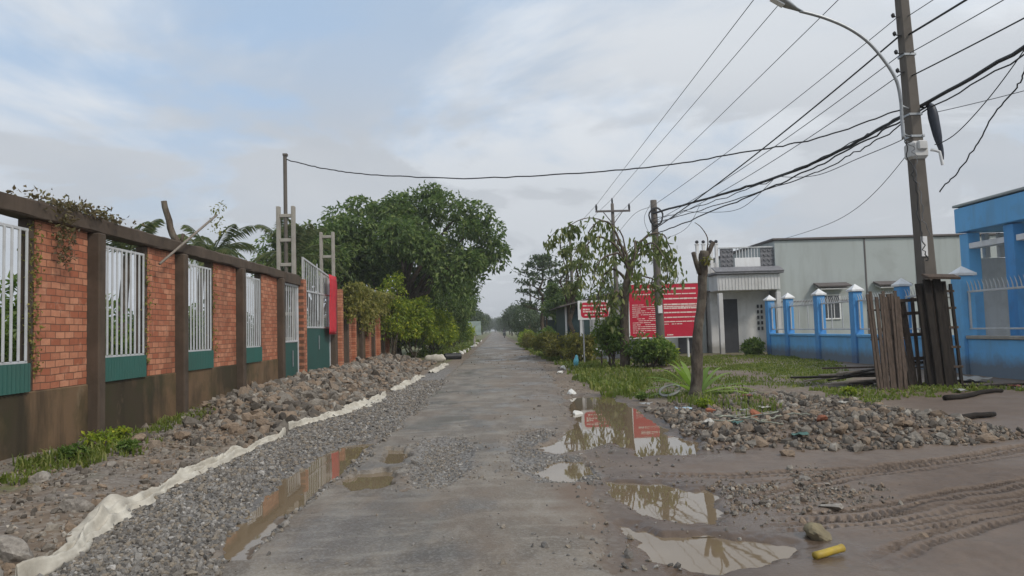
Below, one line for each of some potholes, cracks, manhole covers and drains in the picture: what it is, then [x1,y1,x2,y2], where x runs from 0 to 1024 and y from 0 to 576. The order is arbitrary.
pothole [335,466,403,491]
pothole [505,428,602,483]
